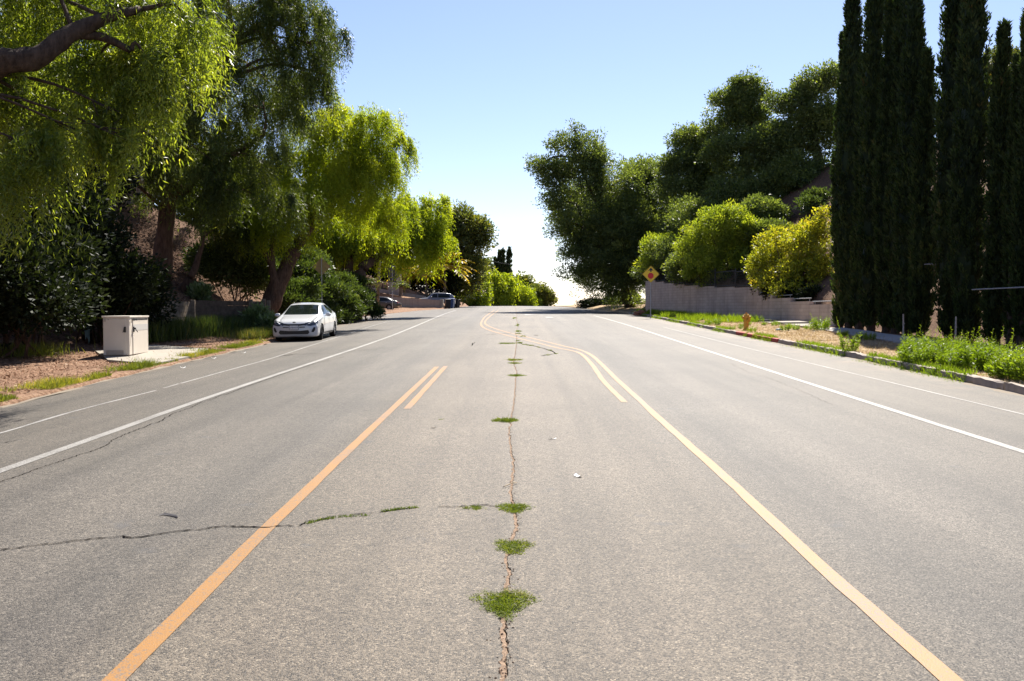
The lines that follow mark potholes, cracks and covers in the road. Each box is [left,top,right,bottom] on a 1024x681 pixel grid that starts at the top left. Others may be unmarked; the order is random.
crack [427,308,555,681]
crack [4,504,492,549]
